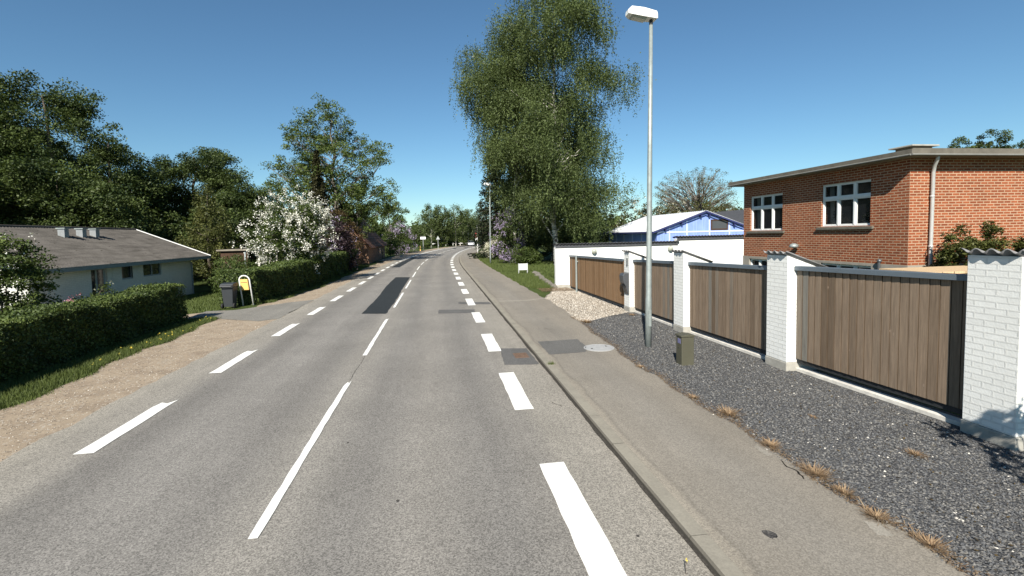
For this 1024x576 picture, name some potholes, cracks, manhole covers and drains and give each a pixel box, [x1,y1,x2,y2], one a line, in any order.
manhole cover [584,344,614,352]
